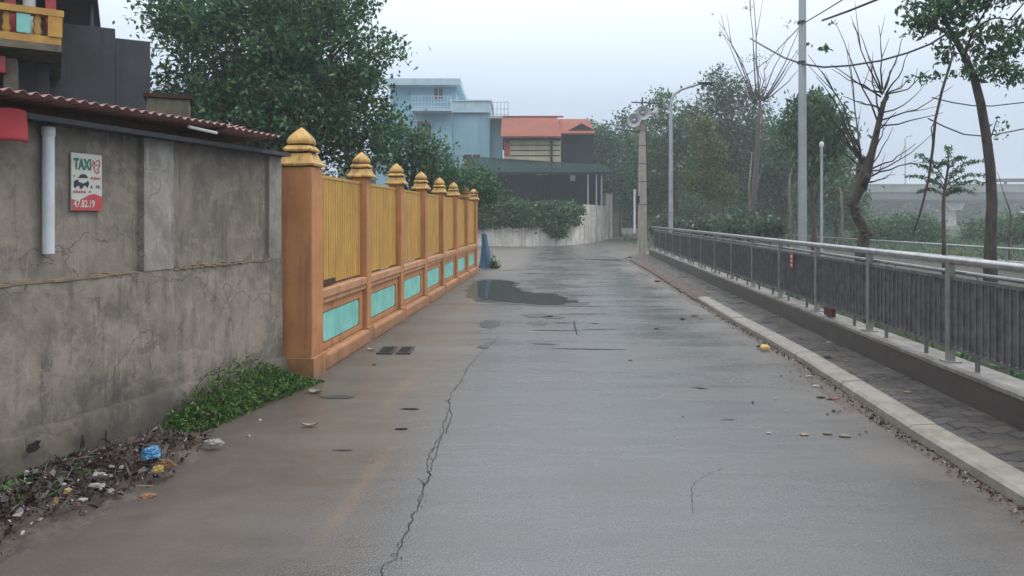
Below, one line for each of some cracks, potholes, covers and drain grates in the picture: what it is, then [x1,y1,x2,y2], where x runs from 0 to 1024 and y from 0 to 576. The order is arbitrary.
crack [380,344,492,576]
drain grate [395,346,415,354]
drain grate [376,346,398,354]
